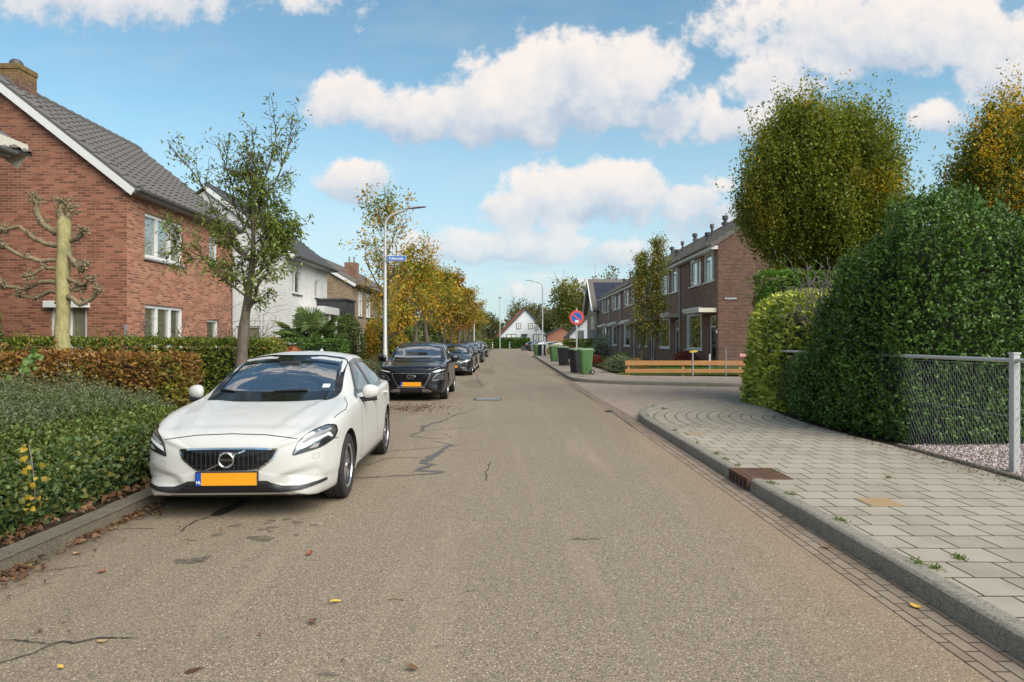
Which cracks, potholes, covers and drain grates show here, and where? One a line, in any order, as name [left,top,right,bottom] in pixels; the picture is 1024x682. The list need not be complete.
crack [0,637,136,663]
